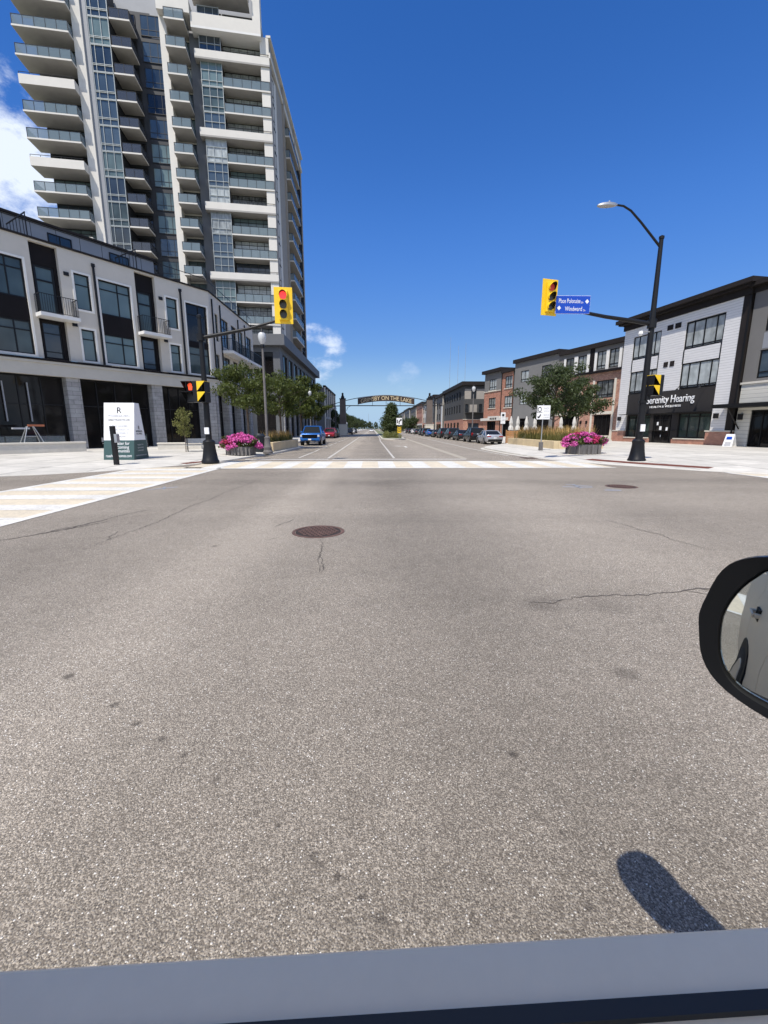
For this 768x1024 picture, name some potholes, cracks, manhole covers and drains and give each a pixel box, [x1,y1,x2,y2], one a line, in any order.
manhole cover [292,525,345,538]
crack [543,588,710,604]
